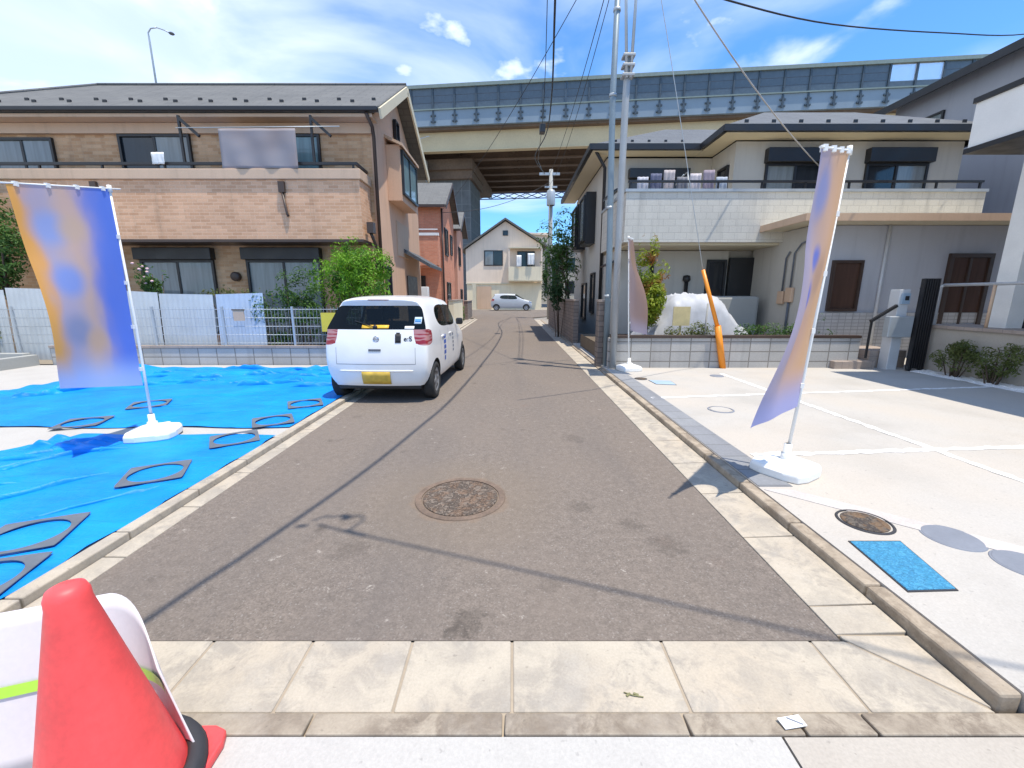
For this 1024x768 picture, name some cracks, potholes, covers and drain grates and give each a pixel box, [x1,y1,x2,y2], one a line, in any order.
manhole cover [835,509,897,535]
manhole cover [415,478,505,521]
